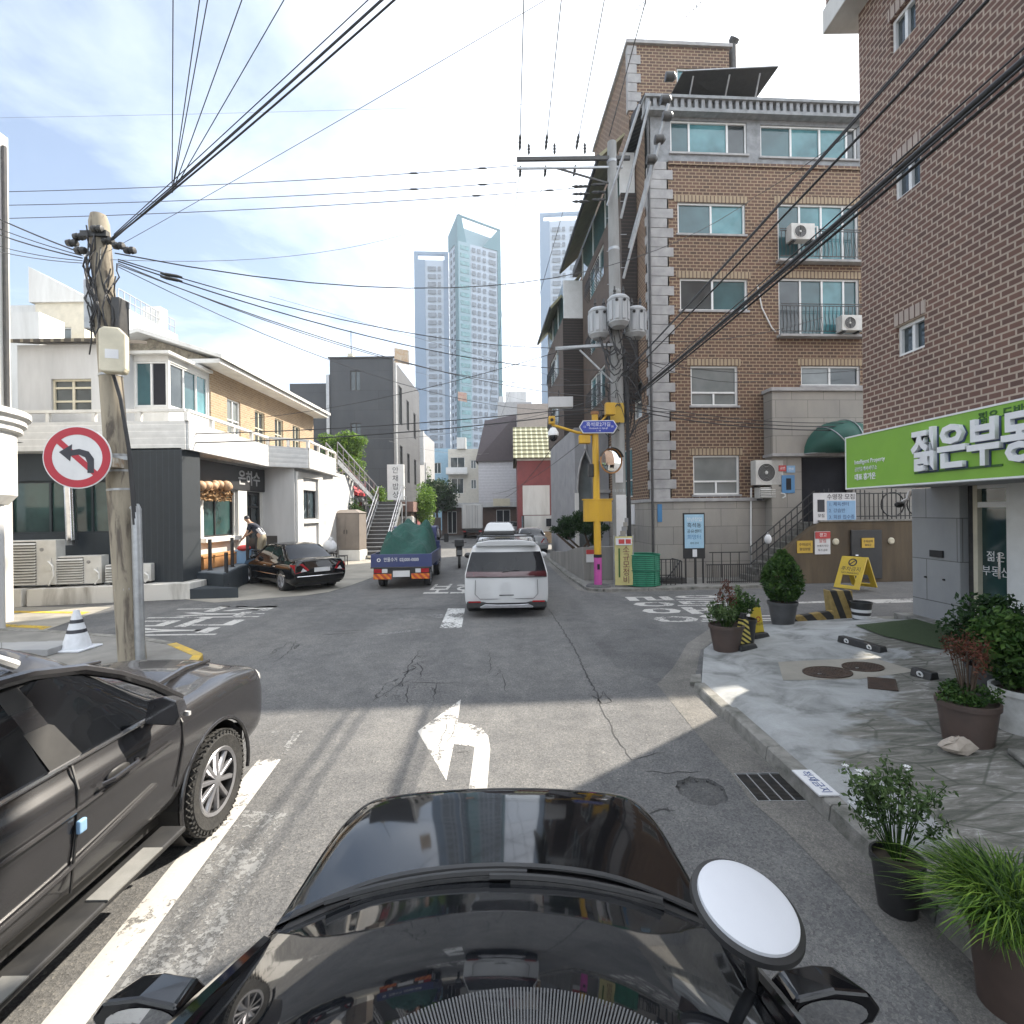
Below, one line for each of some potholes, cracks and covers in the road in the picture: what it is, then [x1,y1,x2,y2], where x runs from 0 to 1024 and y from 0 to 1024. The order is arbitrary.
crack [549,610,698,774]
crack [373,650,468,757]
manhole cover [841,662,885,672]
manhole cover [867,677,898,691]
manhole cover [802,666,853,679]
pothole [676,776,728,806]
drain grate [734,773,805,801]
